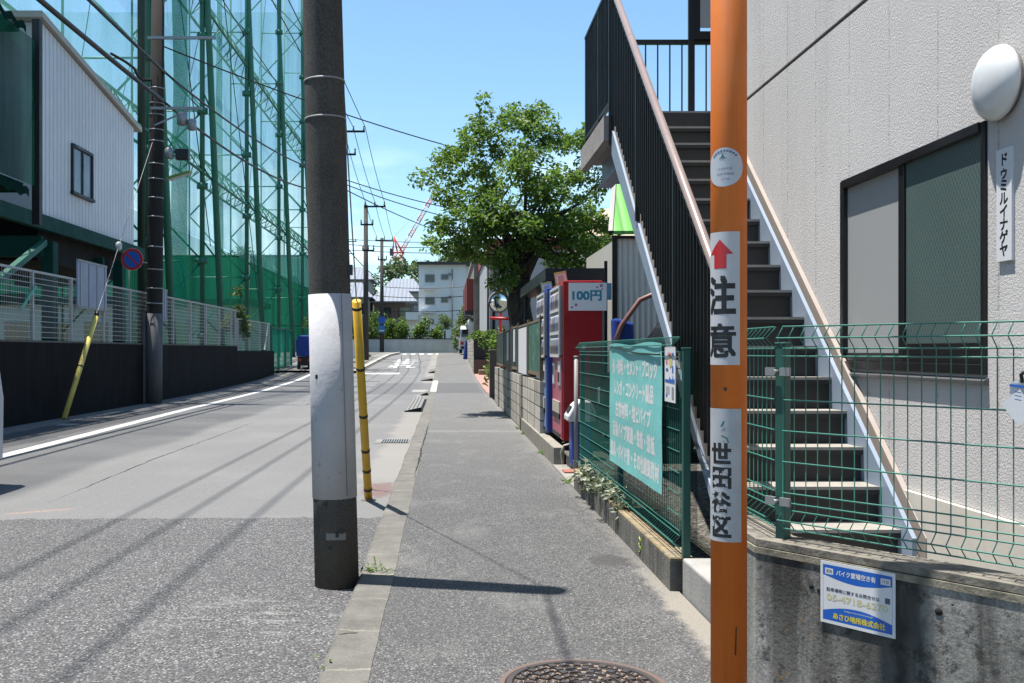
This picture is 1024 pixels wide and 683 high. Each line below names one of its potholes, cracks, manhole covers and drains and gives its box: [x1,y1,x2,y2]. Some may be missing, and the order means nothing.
manhole cover [498,659,666,683]
